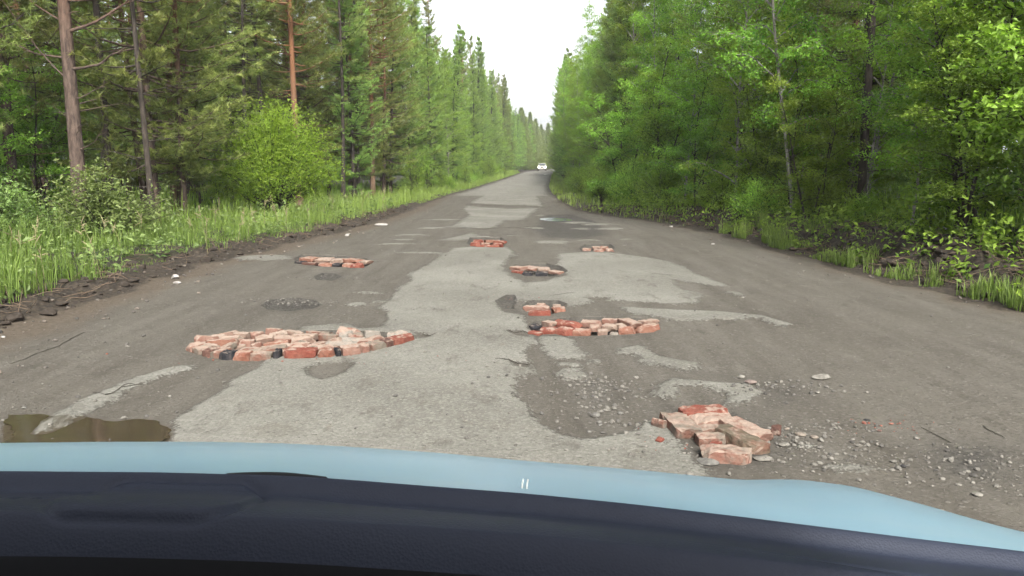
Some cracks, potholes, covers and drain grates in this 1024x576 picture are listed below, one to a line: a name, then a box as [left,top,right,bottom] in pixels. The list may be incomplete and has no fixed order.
pothole [173,328,426,360]
pothole [670,405,772,459]
pothole [461,236,513,248]
pothole [503,262,574,278]
pothole [574,243,621,252]
pothole [514,299,574,315]
pothole [288,254,380,269]
pothole [517,315,669,338]
